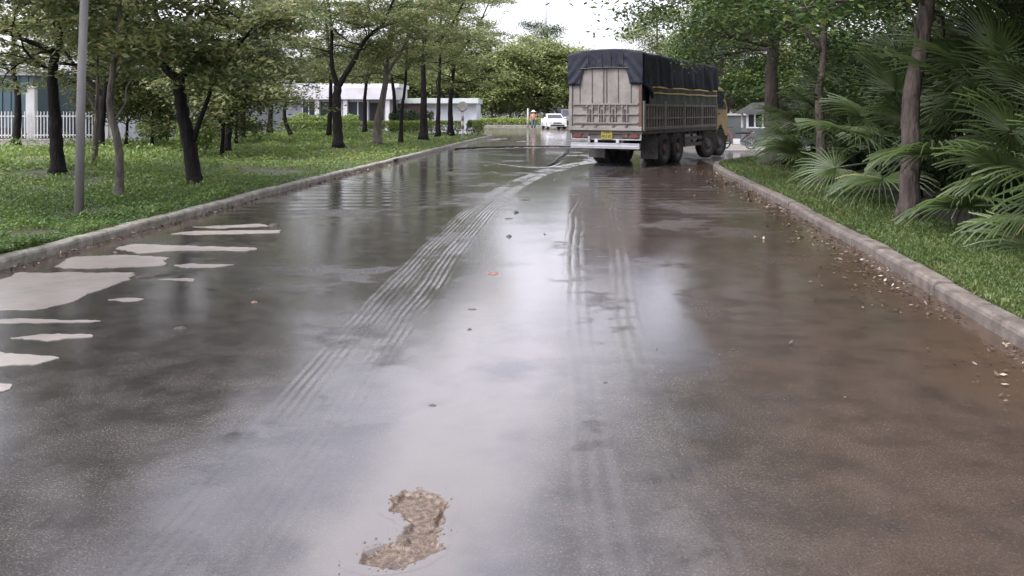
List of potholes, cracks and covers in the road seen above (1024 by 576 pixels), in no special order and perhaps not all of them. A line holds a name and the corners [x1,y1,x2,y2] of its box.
pothole [342,485,460,576]
